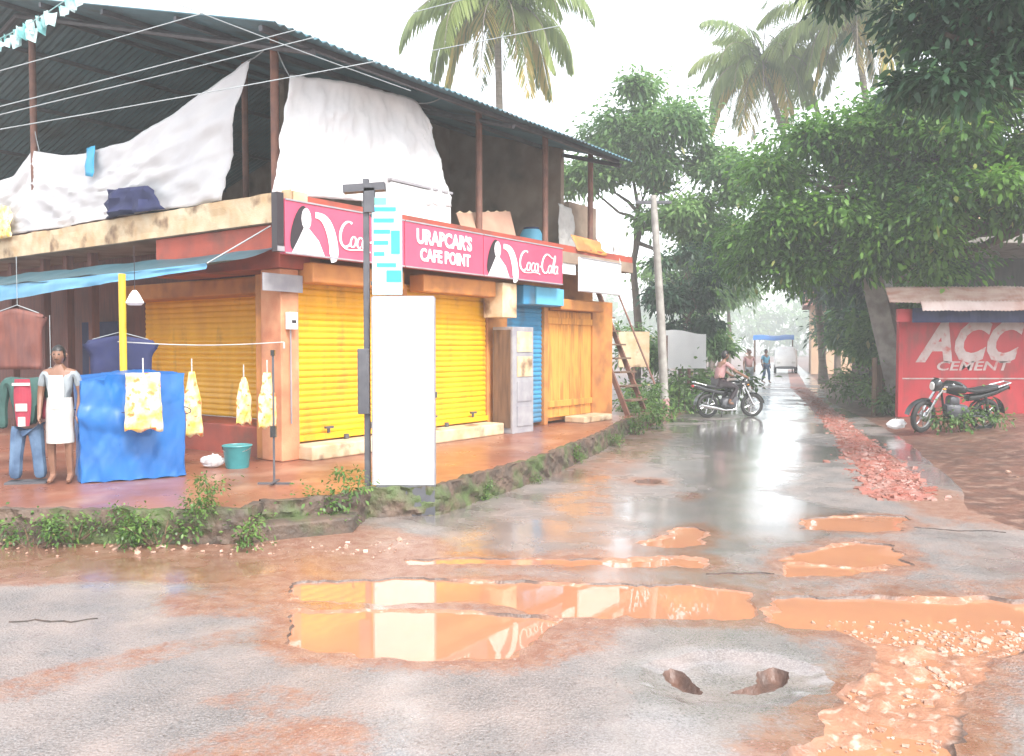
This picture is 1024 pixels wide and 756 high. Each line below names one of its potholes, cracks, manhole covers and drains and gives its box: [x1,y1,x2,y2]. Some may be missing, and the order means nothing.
pothole [777,541,914,577]
pothole [759,594,1024,756]
pothole [287,577,758,621]
pothole [284,607,564,662]
pothole [404,555,710,568]
pothole [638,649,835,709]
pothole [799,515,911,533]
pothole [635,526,710,548]
